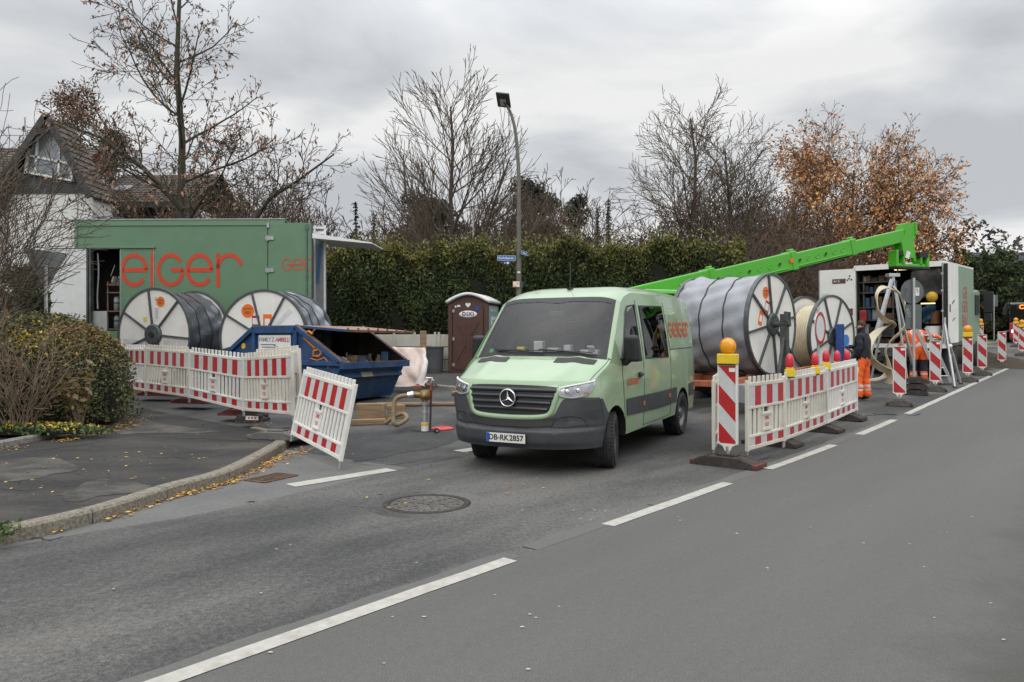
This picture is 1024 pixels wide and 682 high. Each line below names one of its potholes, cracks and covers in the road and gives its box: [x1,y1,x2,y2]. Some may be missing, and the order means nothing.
manhole cover [364,491,489,518]
drain grate [243,472,298,483]
